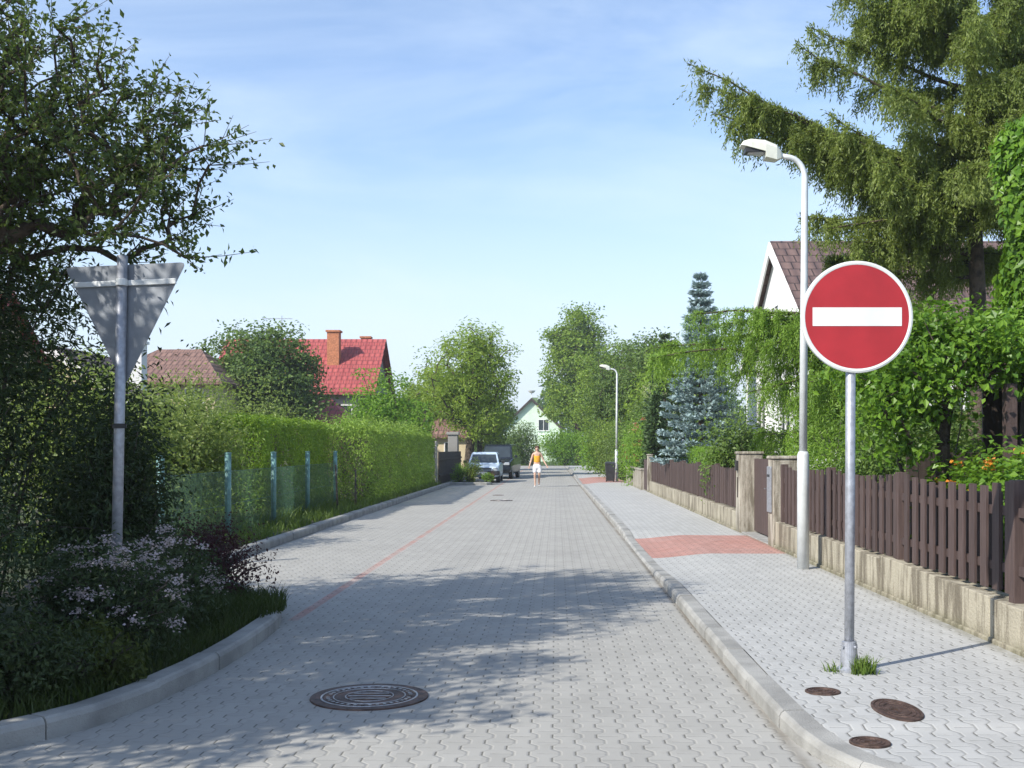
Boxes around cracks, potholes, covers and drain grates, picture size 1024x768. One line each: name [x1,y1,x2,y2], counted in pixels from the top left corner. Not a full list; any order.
utility cover [871,698,924,722]
manhole cover [310,684,428,711]
utility cover [849,736,891,749]
utility cover [805,687,841,696]
